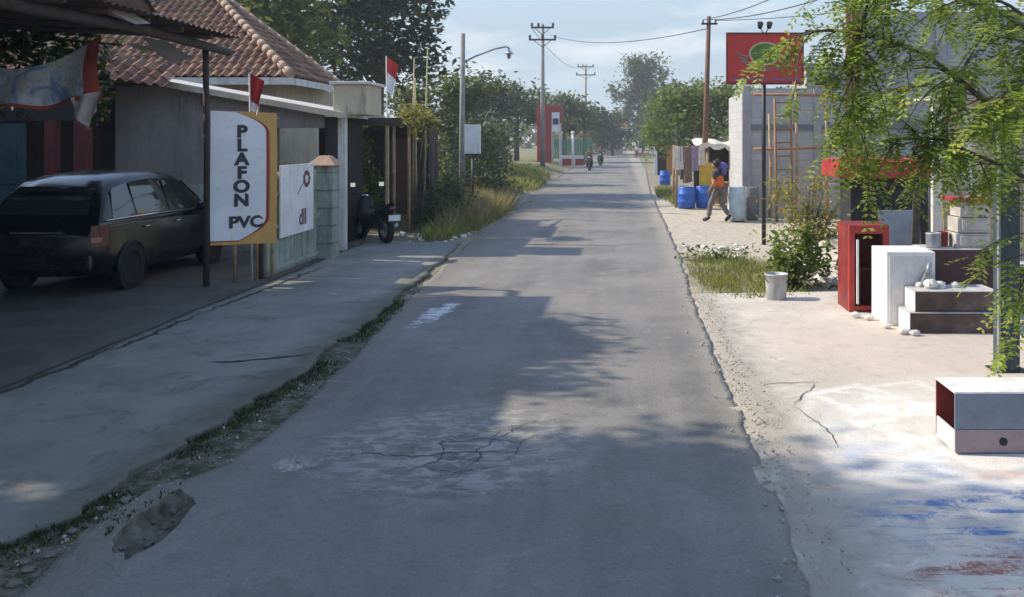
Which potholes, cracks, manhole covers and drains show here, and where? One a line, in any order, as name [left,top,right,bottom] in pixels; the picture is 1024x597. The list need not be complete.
crack [342,418,540,478]
pothole [70,479,221,575]
crack [769,380,838,448]
